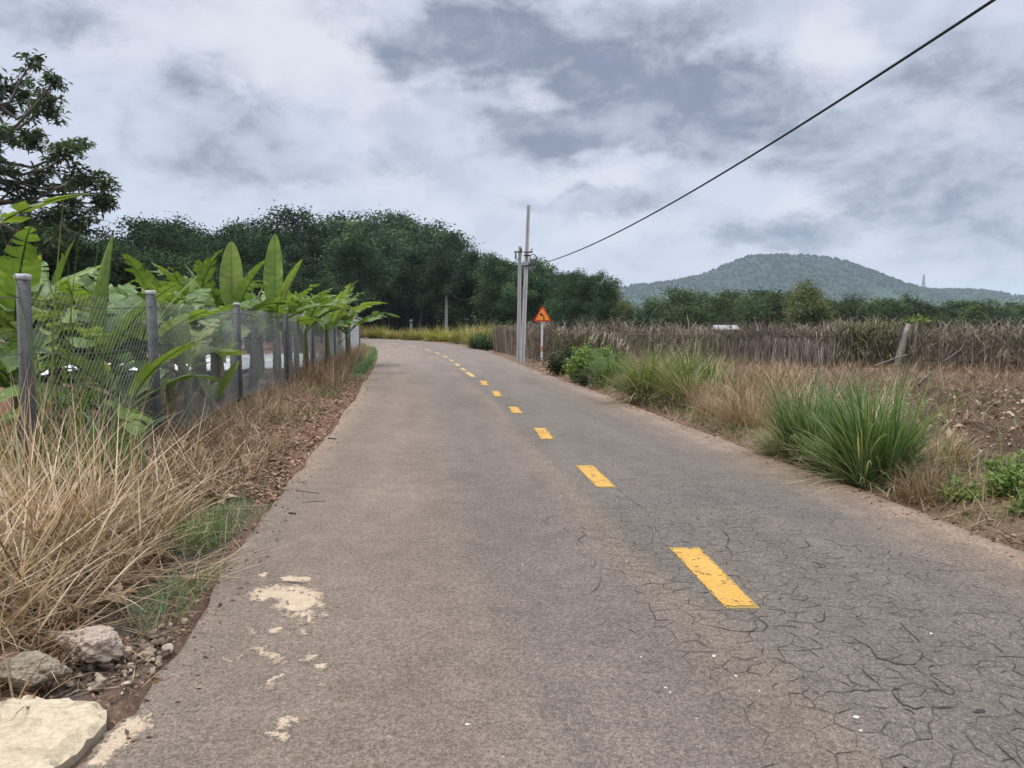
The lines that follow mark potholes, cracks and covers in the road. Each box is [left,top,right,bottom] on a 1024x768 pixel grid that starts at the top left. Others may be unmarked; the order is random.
crack [480,471,1024,768]
